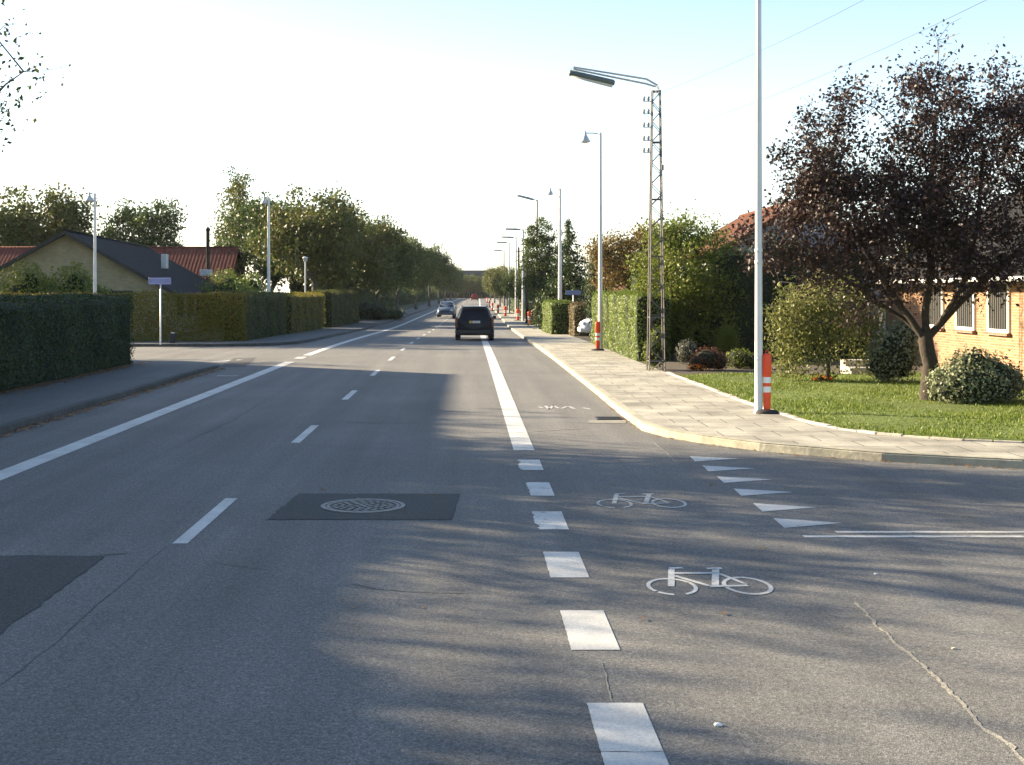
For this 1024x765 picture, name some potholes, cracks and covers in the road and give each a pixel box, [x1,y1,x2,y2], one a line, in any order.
crack [602,663,613,702]
crack [854,602,1024,764]
manhole cover [321,499,405,513]
